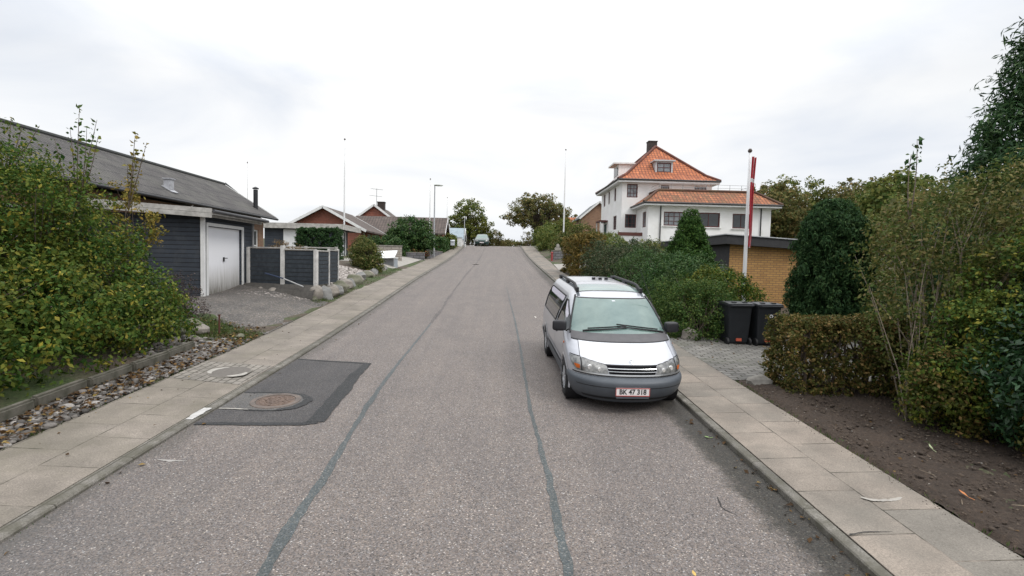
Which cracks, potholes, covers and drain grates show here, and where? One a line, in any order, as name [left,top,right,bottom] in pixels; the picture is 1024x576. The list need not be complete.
manhole cover [220,392,313,411]
manhole cover [207,367,252,378]
